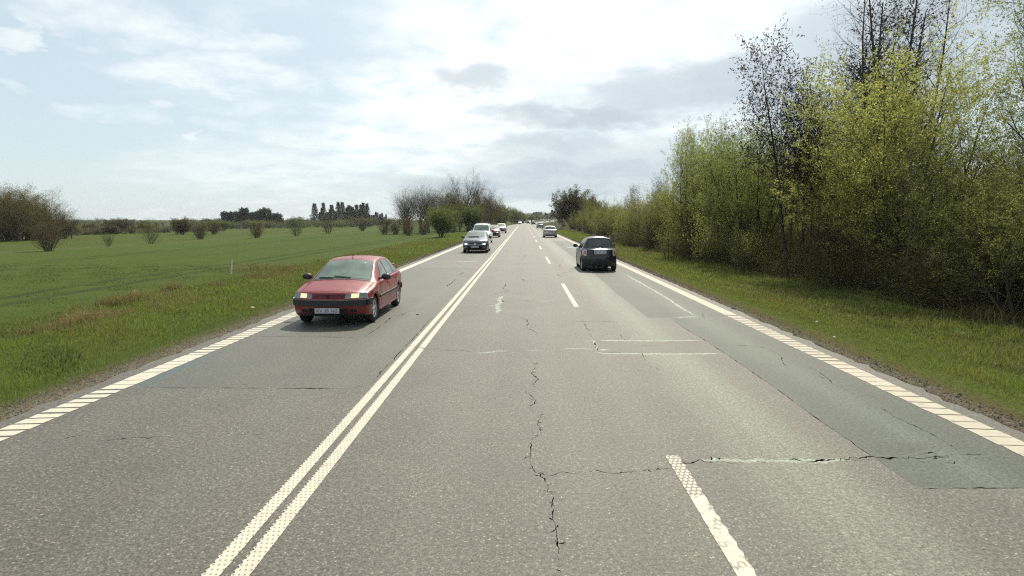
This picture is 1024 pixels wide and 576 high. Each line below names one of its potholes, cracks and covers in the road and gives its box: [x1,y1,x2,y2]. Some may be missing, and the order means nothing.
crack [525,363,668,571]
crack [680,409,982,464]
